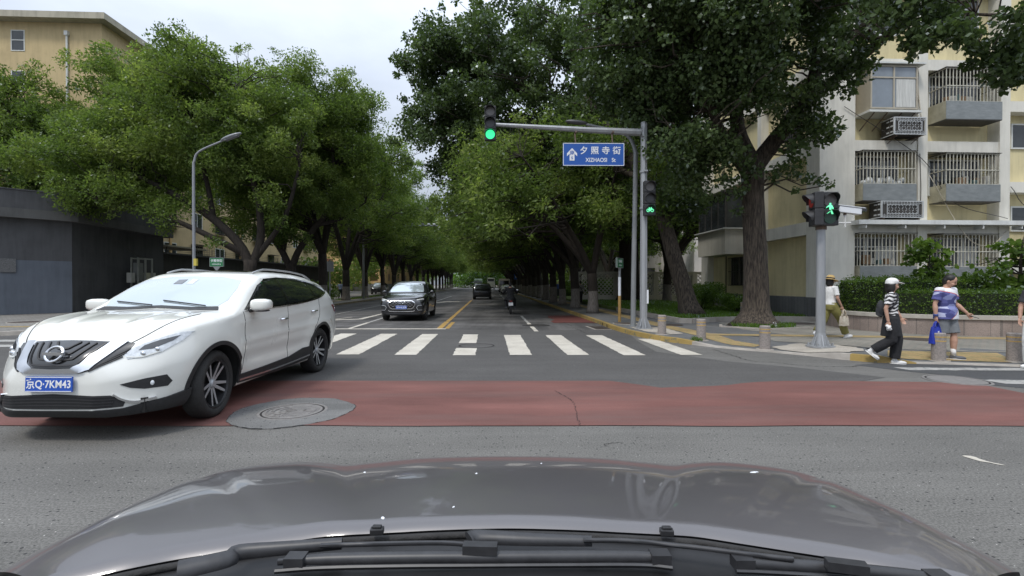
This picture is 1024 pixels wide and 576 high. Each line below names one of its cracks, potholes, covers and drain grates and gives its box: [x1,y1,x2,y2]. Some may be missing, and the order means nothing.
manhole cover [226,398,356,429]
